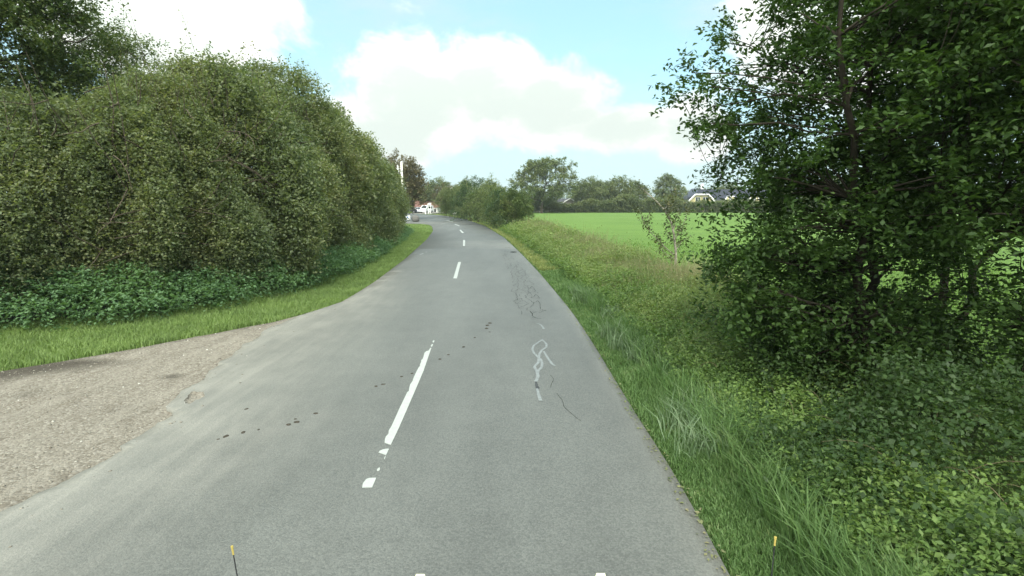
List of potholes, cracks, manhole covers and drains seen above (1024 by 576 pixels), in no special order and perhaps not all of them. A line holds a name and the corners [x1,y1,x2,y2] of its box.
pothole [184,391,205,404]
crack [502,247,581,421]
